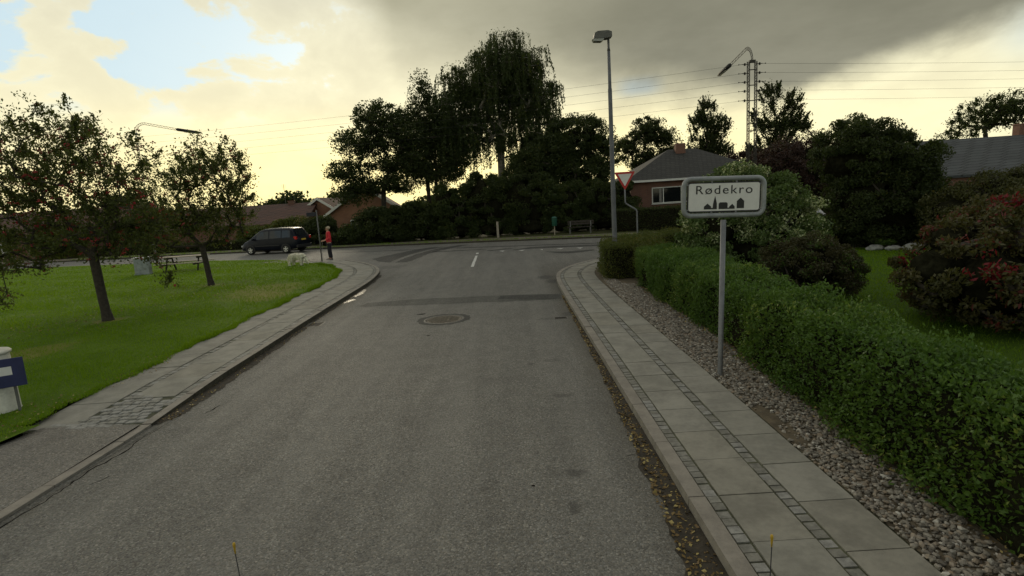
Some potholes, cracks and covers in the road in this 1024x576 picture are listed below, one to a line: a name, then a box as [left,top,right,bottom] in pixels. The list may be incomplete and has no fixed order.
manhole cover [423,315,465,324]
